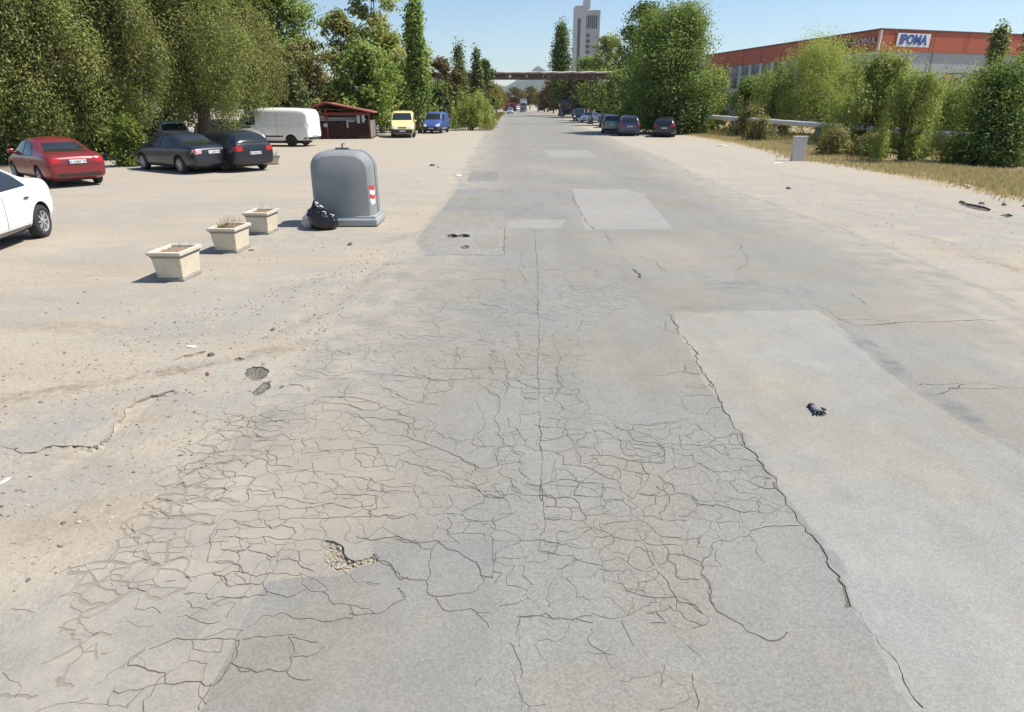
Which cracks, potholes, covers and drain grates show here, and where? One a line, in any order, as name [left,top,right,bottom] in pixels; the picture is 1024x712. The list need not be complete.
pothole [245,366,270,380]
crack [0,231,923,712]
crack [572,195,749,278]
crack [815,293,996,325]
pothole [324,540,378,574]
pothole [252,381,271,396]
